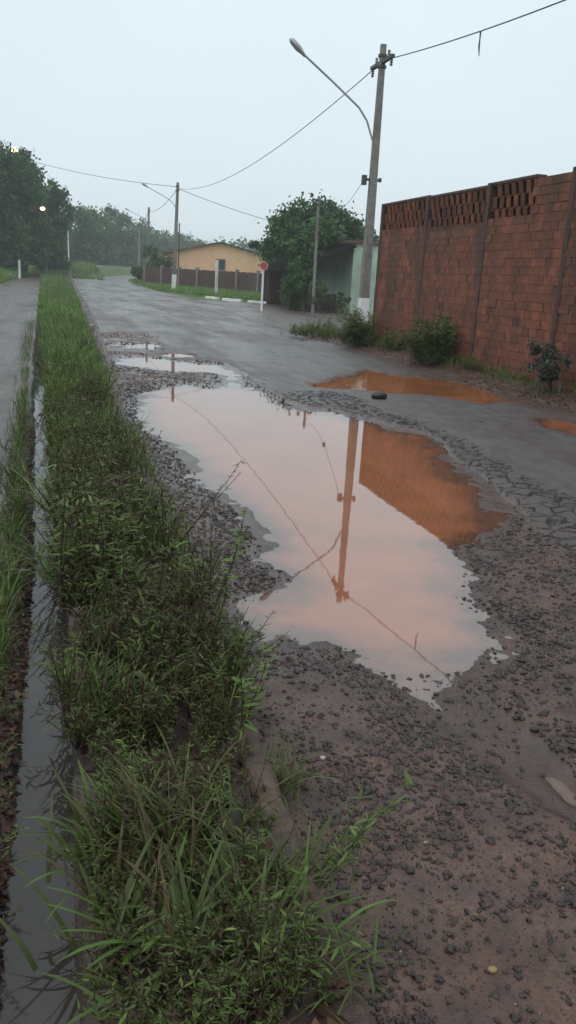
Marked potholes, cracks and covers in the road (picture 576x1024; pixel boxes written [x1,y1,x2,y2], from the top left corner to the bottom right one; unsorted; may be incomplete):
pothole [104,339,170,350]
pothole [108,351,576,1024]
crack [282,390,576,551]
